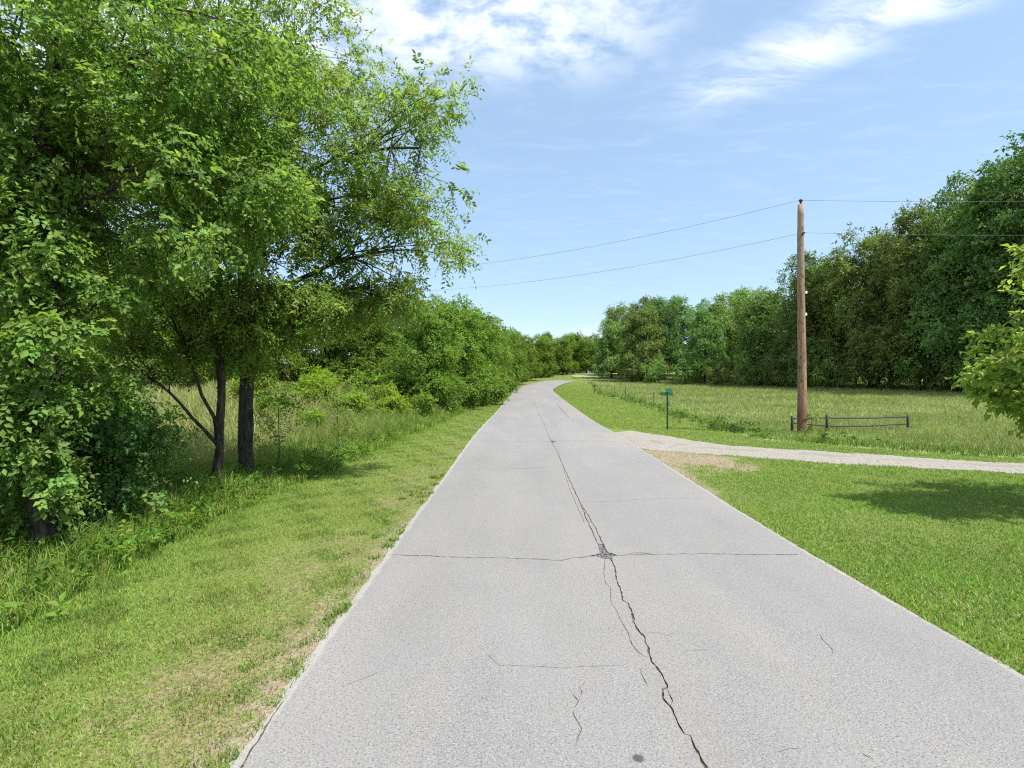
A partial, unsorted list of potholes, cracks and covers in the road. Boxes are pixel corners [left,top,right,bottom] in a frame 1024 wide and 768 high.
crack [405,405,801,768]
